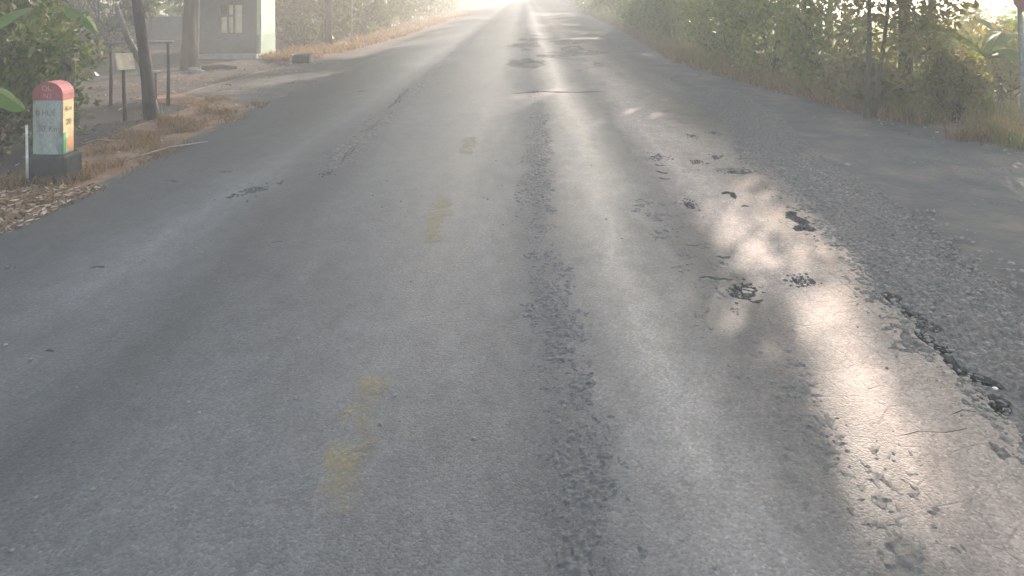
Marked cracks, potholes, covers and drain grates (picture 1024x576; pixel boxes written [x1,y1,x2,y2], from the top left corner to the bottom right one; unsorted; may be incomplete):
pothole [792,276,816,288]
pothole [224,186,268,198]
pothole [785,211,817,232]
pothole [727,282,758,300]
pothole [987,399,1005,413]
crack [898,409,975,436]
